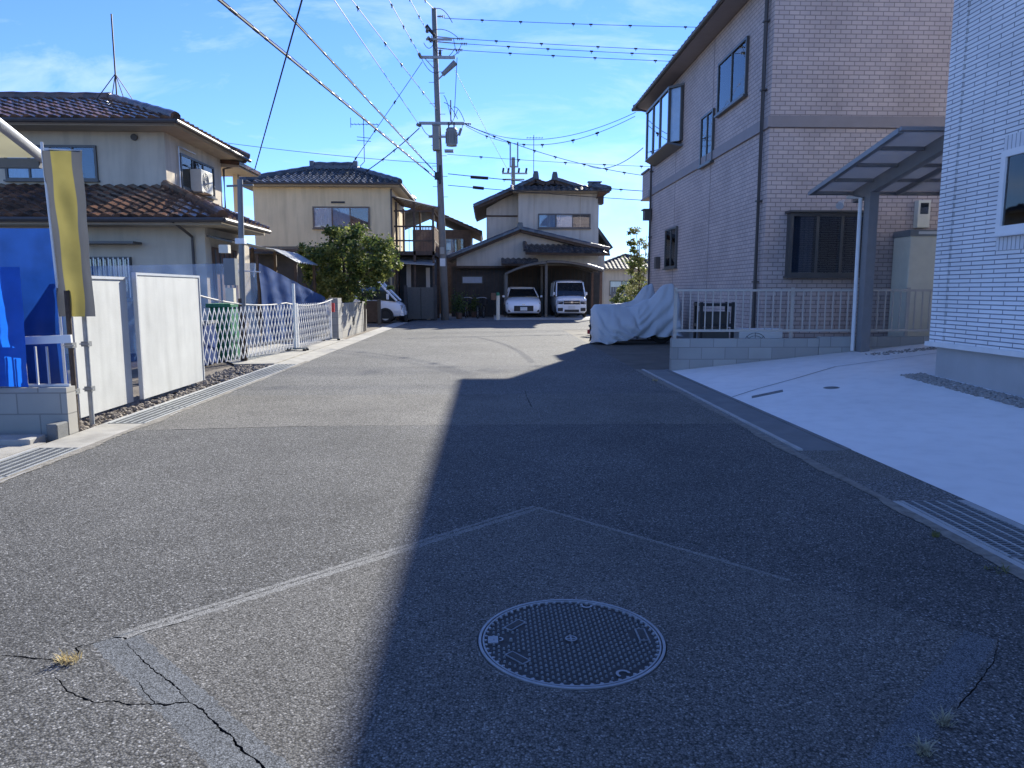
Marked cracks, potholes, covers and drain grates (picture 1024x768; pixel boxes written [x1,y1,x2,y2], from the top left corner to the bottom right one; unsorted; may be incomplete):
drain grate [153,395,217,408]
drain grate [218,377,263,385]
drain grate [900,500,1024,558]
drain grate [0,447,82,477]
manhole cover [478,599,666,690]
drain grate [189,385,242,395]
drain grate [108,407,185,424]
crack [837,589,1000,709]
crack [0,617,265,768]
